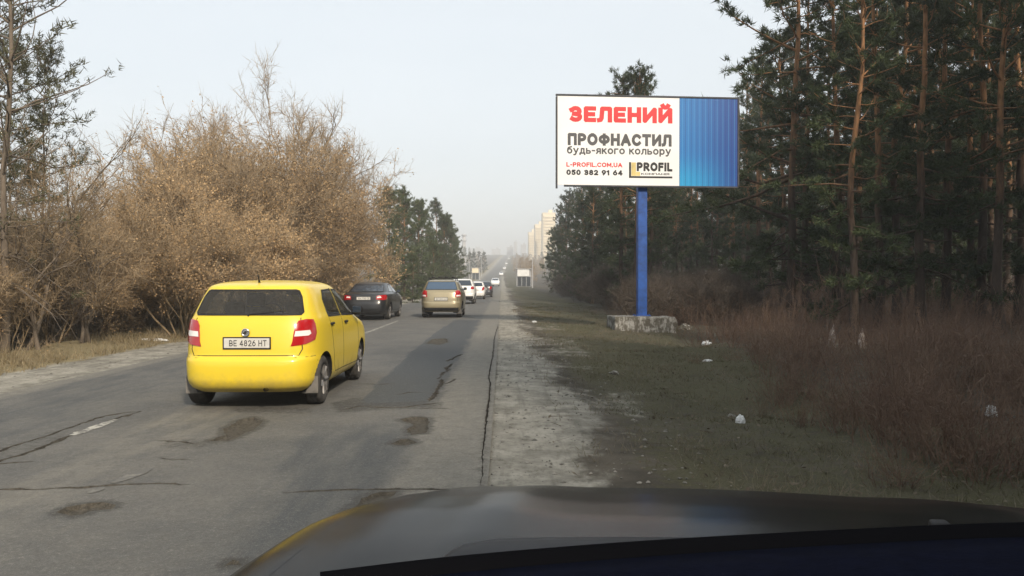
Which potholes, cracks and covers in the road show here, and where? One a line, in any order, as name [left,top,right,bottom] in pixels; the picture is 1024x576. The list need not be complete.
pothole [209,417,263,441]
crack [0,411,141,464]
crack [341,354,463,411]
crack [480,327,498,484]
pothole [57,502,116,516]
pothole [400,417,430,435]
